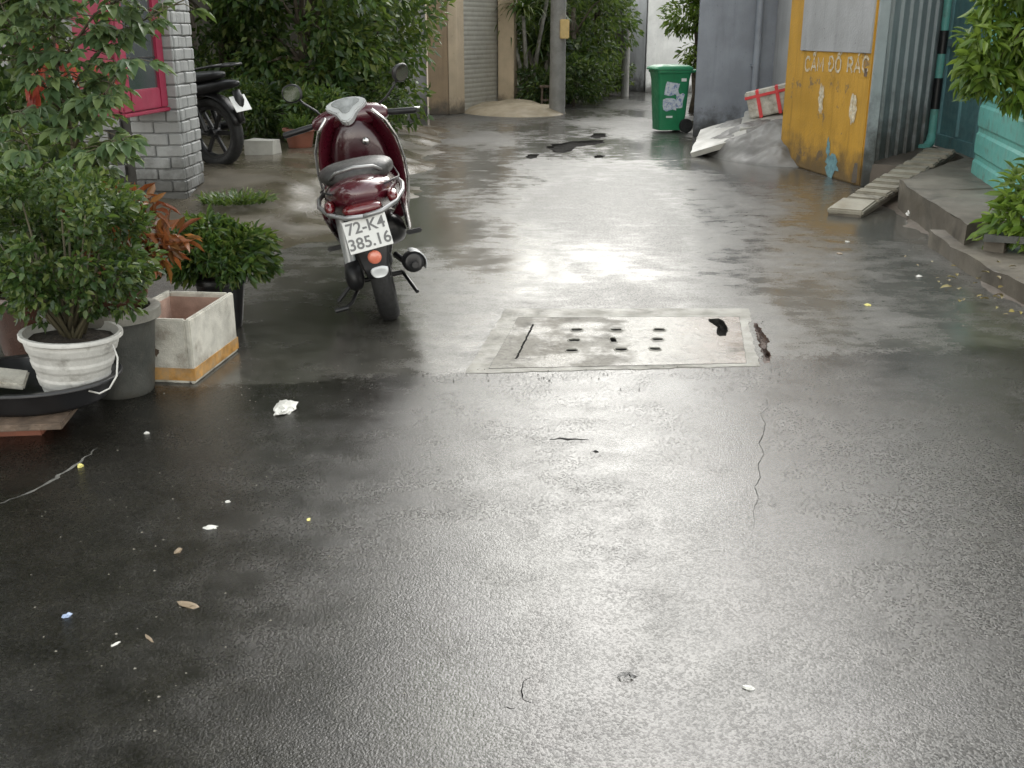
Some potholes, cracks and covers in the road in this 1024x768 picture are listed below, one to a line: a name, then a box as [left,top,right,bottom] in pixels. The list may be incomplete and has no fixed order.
pothole [754,323,771,363]
crack [751,405,768,533]
pothole [615,672,638,683]
crack [2,448,97,503]
pothole [546,140,605,153]
manhole cover [465,308,760,373]
